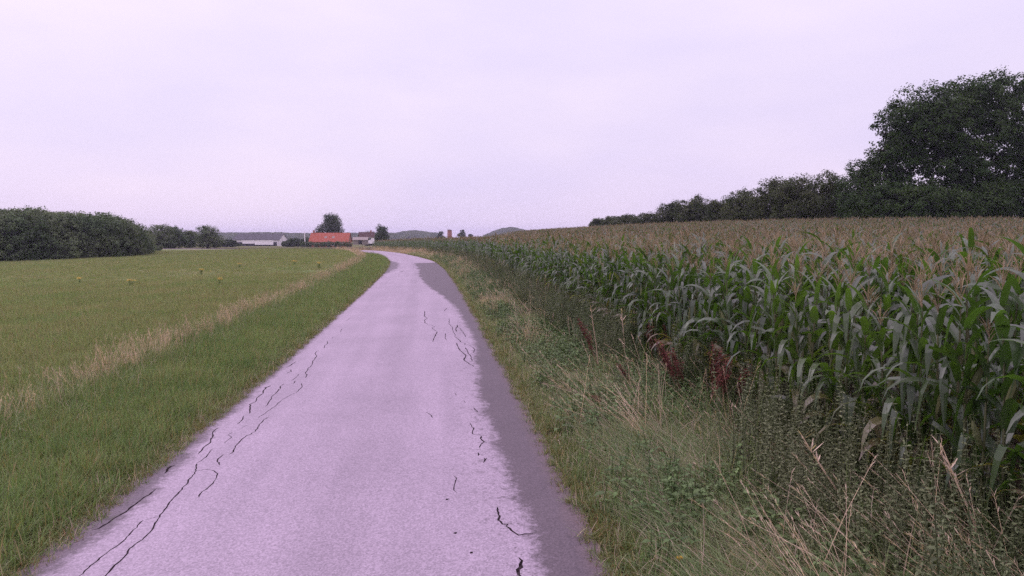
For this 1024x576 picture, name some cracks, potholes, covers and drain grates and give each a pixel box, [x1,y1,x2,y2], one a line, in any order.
crack [424,308,475,367]
crack [79,319,349,576]
crack [516,557,524,576]
crack [497,507,533,536]
